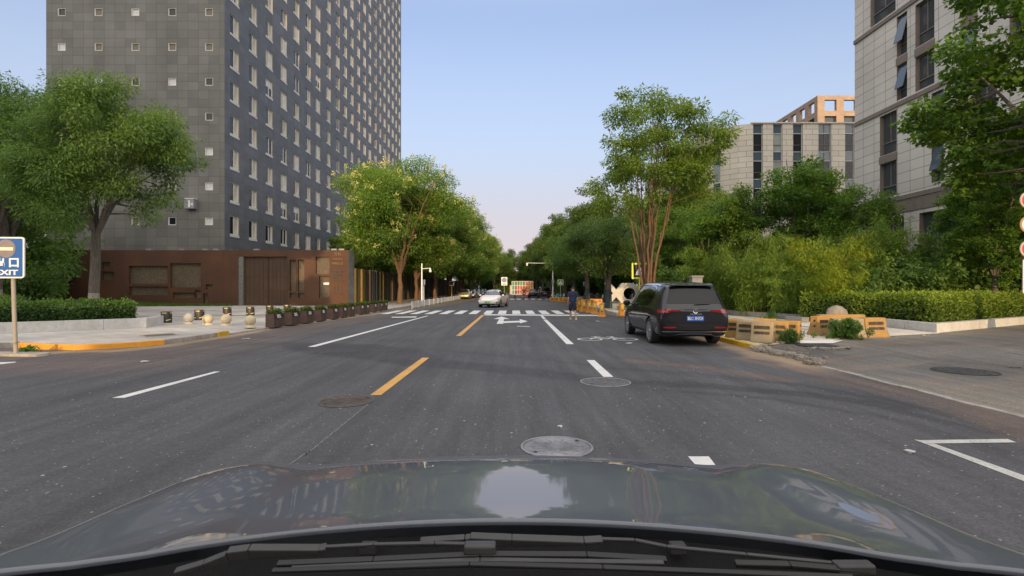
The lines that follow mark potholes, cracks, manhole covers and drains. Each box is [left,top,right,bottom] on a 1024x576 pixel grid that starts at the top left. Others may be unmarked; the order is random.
manhole cover [580,377,631,387]
manhole cover [317,395,374,407]
manhole cover [521,436,594,456]
manhole cover [930,367,1002,376]
